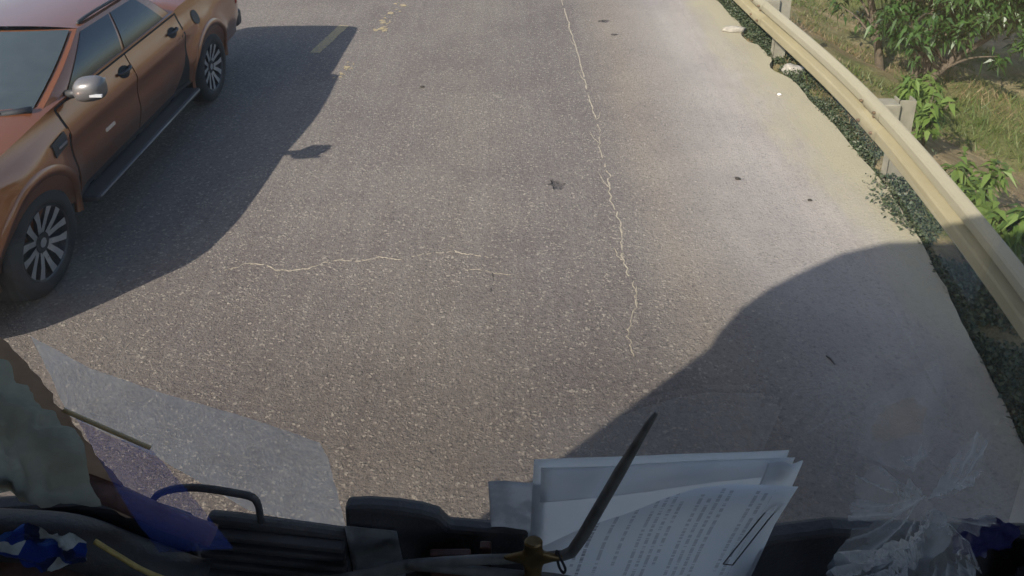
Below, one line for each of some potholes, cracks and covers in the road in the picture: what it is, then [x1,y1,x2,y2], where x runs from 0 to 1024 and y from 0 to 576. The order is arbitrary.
crack [220,250,508,291]
crack [561,0,638,356]
pothole [548,179,566,190]
